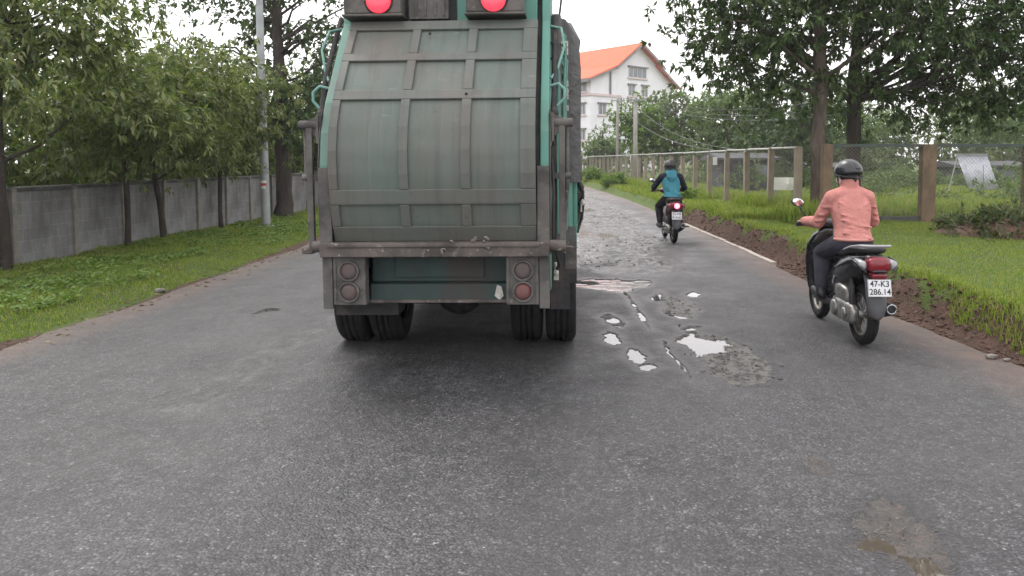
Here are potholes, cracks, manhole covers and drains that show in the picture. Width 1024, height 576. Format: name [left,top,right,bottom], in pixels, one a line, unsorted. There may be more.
pothole [649,290,700,319]
pothole [601,331,622,346]
pothole [638,363,658,371]
pothole [847,497,955,576]
pothole [674,324,784,387]
pothole [576,278,652,294]
pothole [600,313,625,329]
pothole [625,348,648,364]
